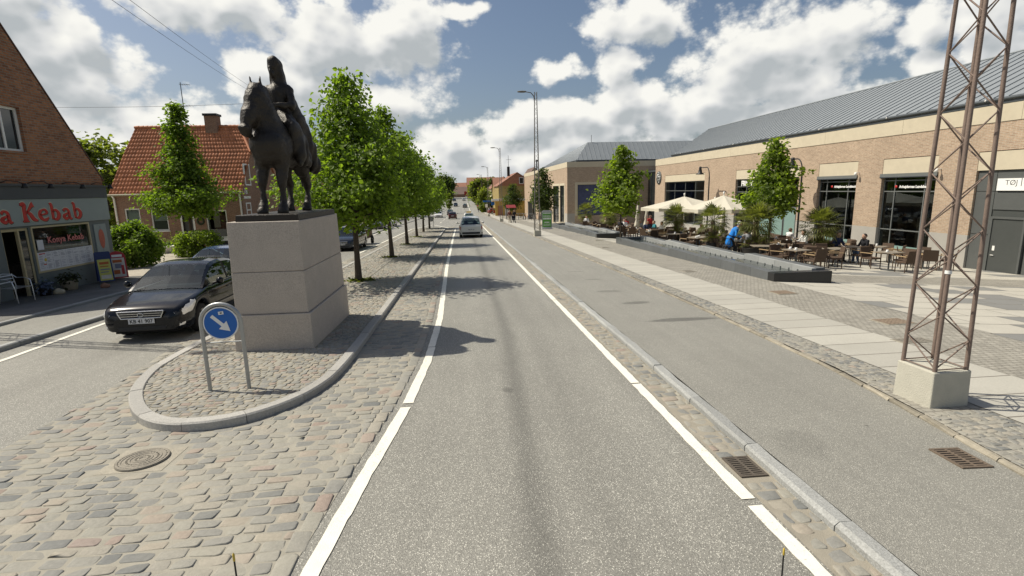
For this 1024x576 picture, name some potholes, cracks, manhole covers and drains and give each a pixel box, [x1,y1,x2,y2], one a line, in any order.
drain grate [928,447,994,469]
drain grate [722,456,769,478]
manhole cover [94,447,188,475]
